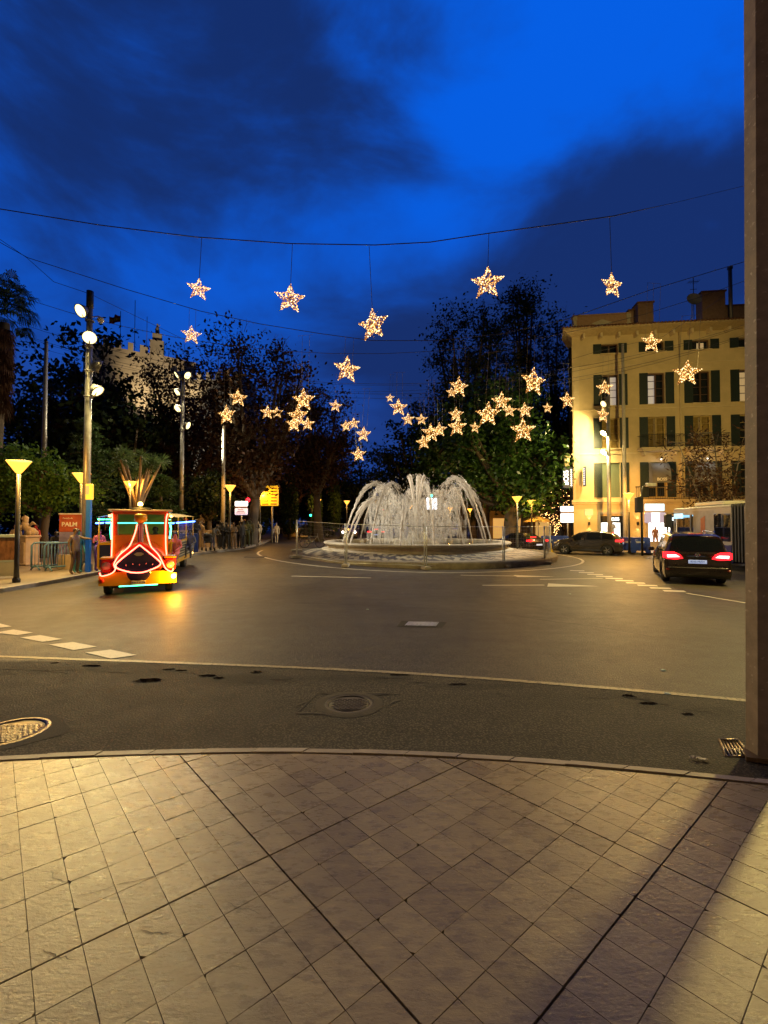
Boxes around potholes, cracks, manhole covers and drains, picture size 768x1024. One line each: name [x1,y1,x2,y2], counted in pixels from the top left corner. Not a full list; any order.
drain grate [718,738,745,758]
manhole cover [315,692,383,718]
manhole cover [0,714,73,750]
